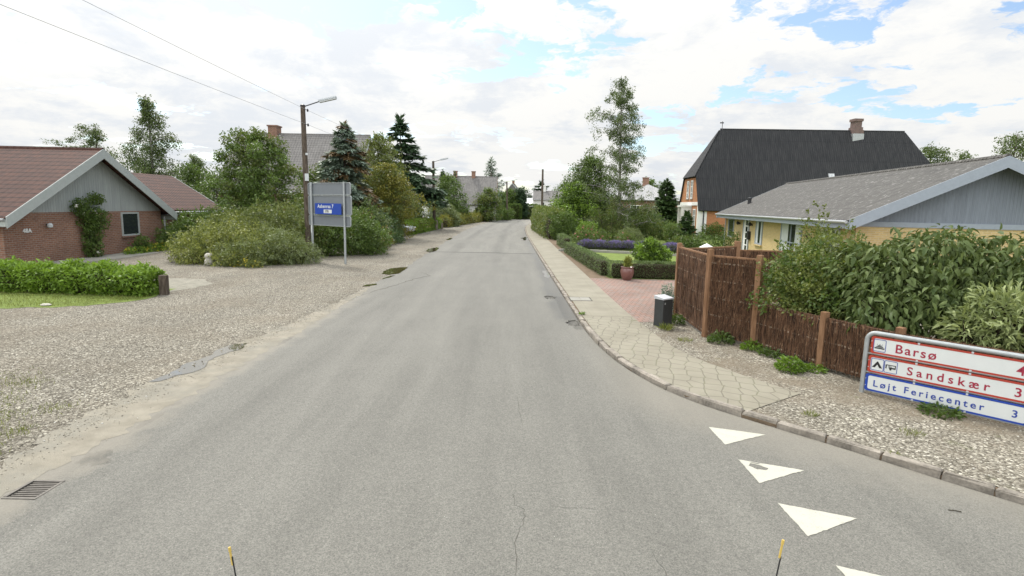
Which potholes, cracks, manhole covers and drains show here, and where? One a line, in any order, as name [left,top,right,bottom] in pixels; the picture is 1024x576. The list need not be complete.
drain grate [1,480,65,500]
